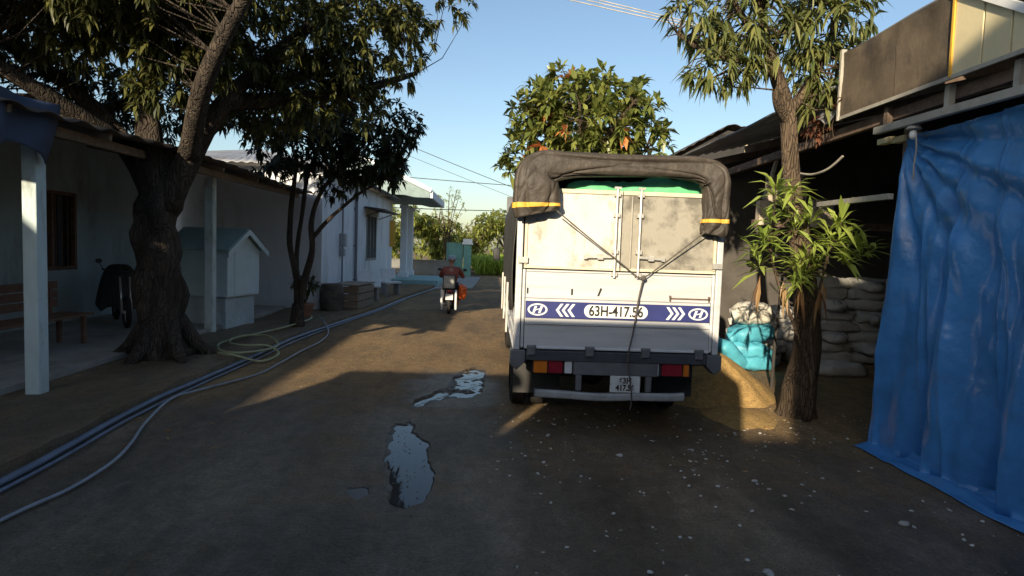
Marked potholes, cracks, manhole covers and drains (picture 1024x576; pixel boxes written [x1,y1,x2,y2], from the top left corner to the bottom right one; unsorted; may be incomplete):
pothole [382,417,436,509]
pothole [345,485,370,501]
